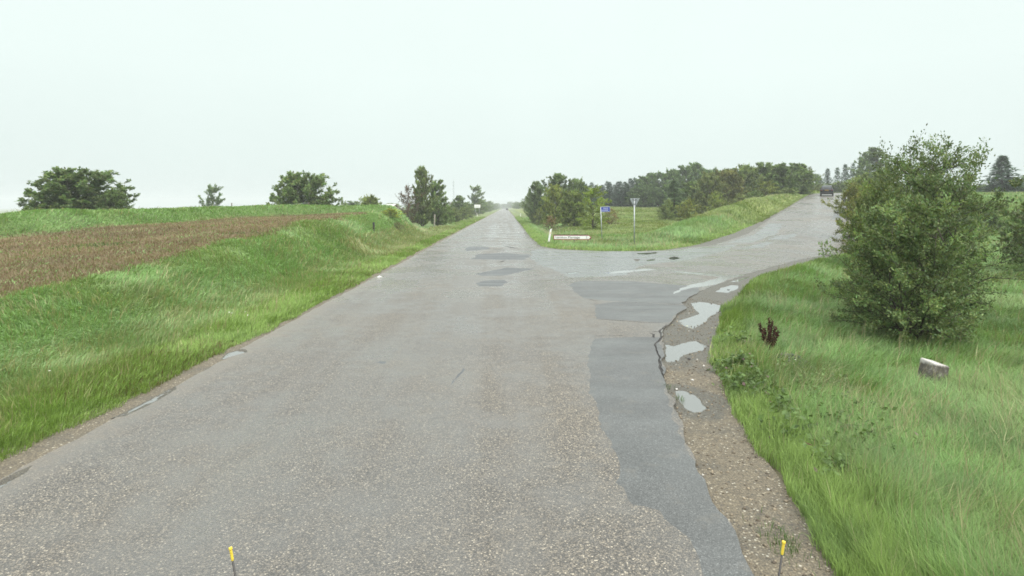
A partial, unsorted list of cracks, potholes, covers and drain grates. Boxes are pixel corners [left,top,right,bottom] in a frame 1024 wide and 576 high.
pothole [663,340,707,362]
crack [651,325,666,382]
pothole [678,301,721,329]
pothole [221,349,247,359]
pothole [714,284,740,293]
pothole [673,390,707,413]
pothole [111,386,176,419]
